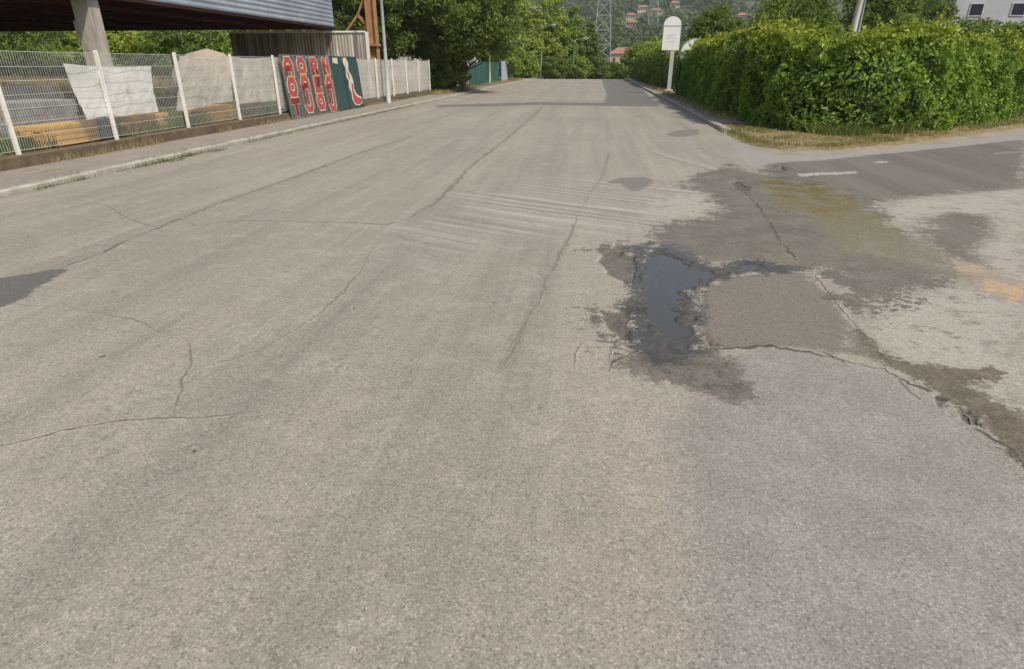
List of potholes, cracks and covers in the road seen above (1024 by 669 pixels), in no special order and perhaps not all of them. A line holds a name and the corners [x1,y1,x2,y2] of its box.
crack [63,201,156,228]
crack [0,220,407,448]
crack [503,153,647,371]
pothole [588,248,649,287]
pothole [623,246,787,355]
crack [698,271,1024,468]
